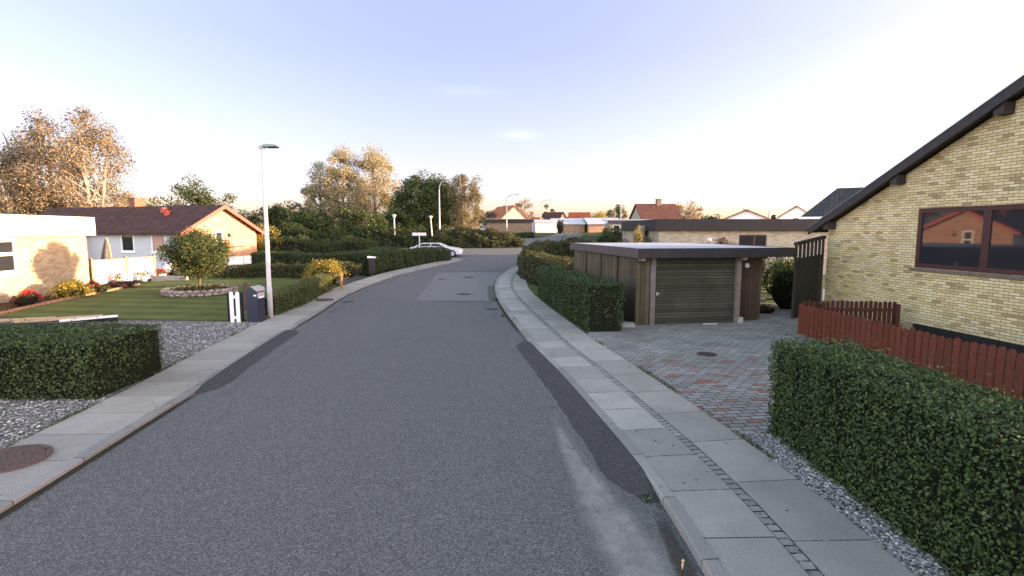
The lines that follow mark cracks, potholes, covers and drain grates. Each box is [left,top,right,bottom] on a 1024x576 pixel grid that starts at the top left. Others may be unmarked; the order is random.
manhole cover [0,444,54,474]
